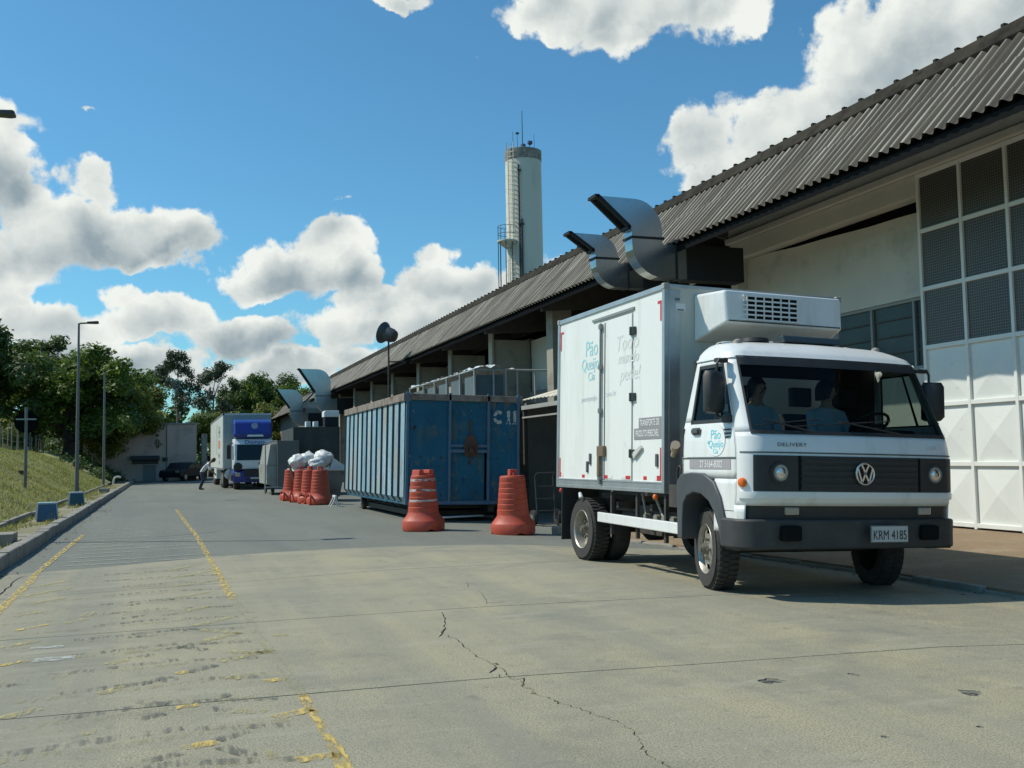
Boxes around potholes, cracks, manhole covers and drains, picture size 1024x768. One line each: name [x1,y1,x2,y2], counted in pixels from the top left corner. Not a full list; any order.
crack [441,613,669,768]
